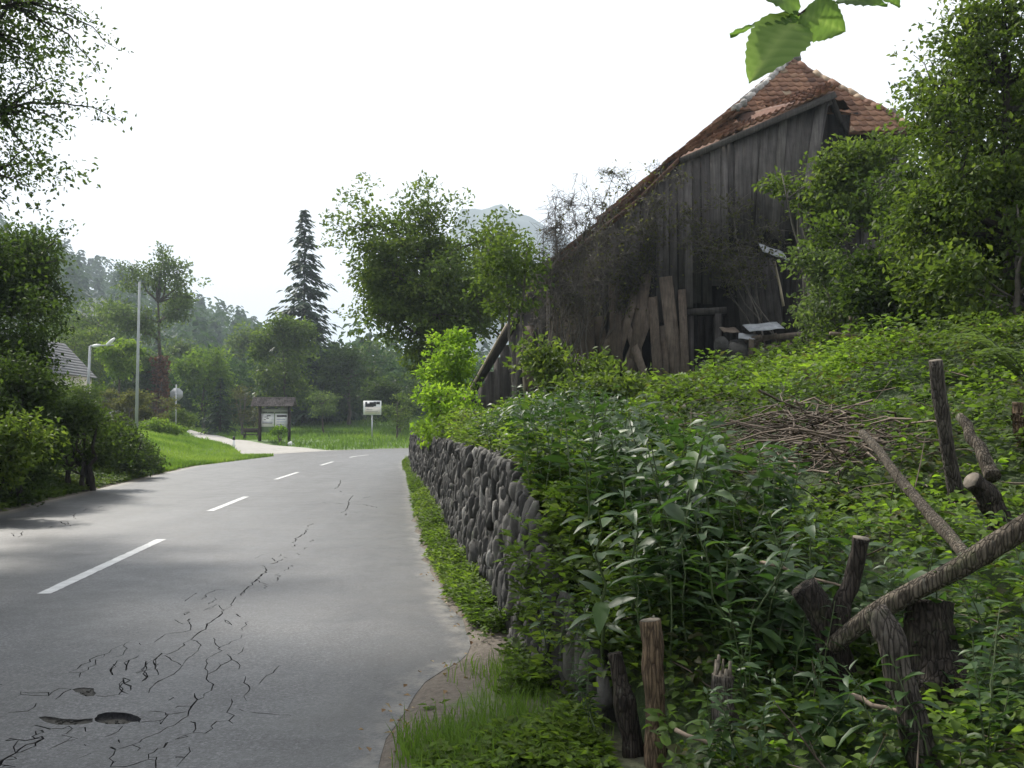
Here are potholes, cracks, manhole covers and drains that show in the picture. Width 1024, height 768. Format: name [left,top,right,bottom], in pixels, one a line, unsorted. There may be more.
crack [0,587,279,768]
pothole [72,688,96,696]
crack [241,524,312,594]
pothole [39,716,93,727]
pothole [95,712,141,731]
